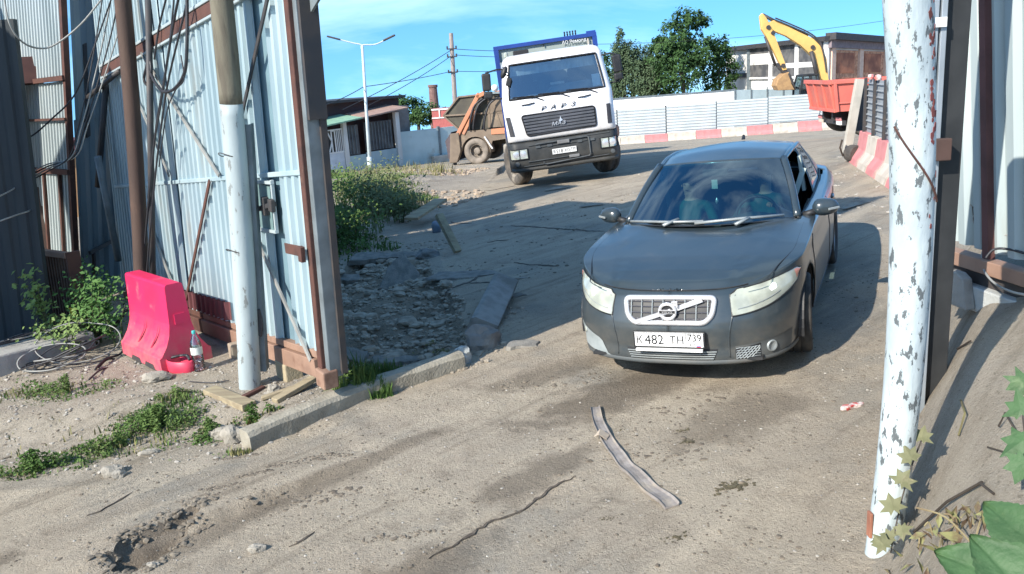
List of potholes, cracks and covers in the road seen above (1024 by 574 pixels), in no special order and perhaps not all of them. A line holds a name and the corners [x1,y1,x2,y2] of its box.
pothole [105,503,201,573]
crack [428,477,573,559]
crack [87,492,132,516]
crack [487,225,593,243]
